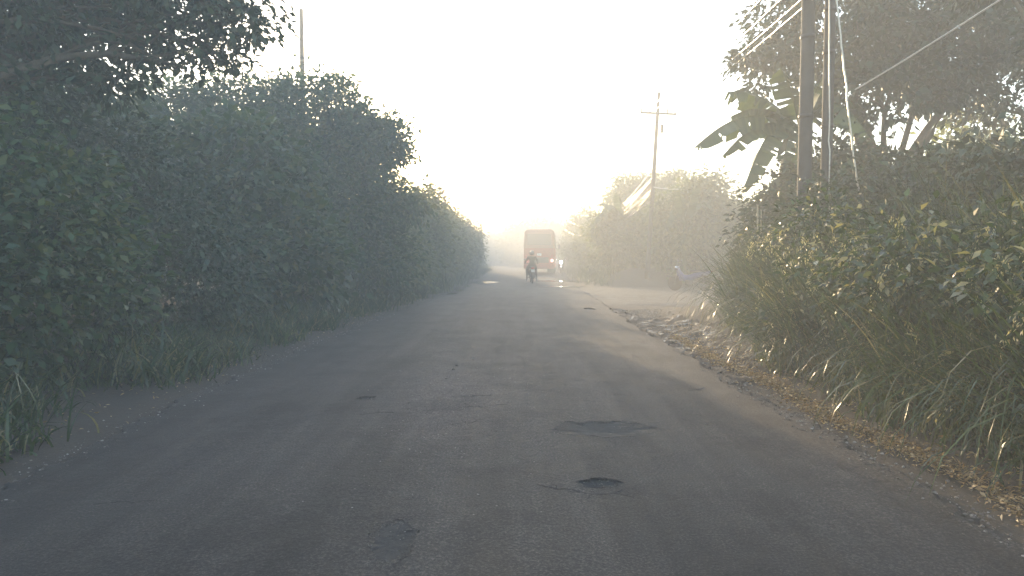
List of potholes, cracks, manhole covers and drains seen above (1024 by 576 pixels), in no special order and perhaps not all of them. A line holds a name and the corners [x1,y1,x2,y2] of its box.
pothole [550,420,662,438]
pothole [575,477,623,488]
crack [536,481,634,500]
